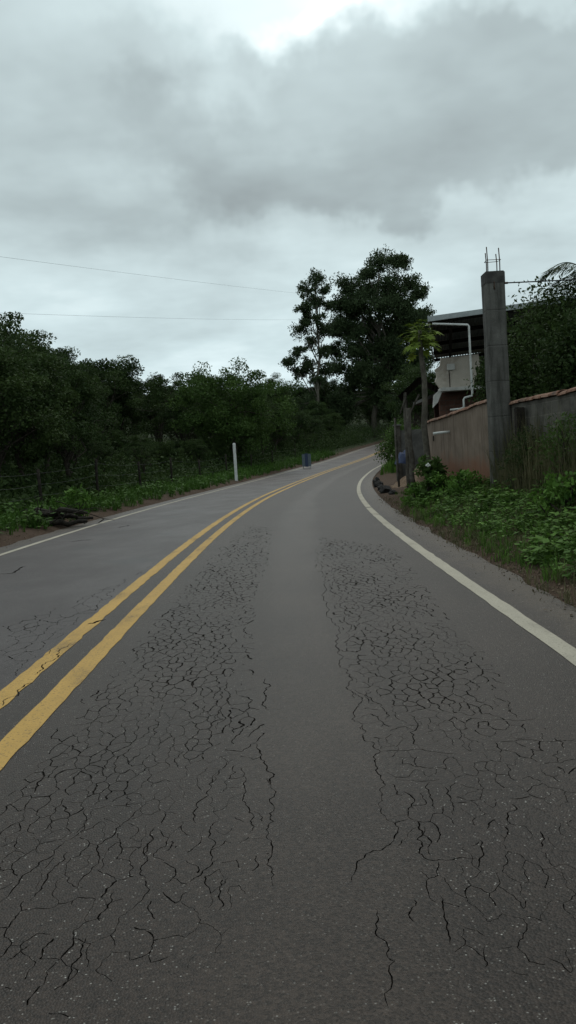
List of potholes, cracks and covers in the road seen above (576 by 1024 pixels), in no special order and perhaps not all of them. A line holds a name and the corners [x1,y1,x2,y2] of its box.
crack [375,910,395,1006]
crack [0,527,276,1017]
crack [315,538,576,975]
